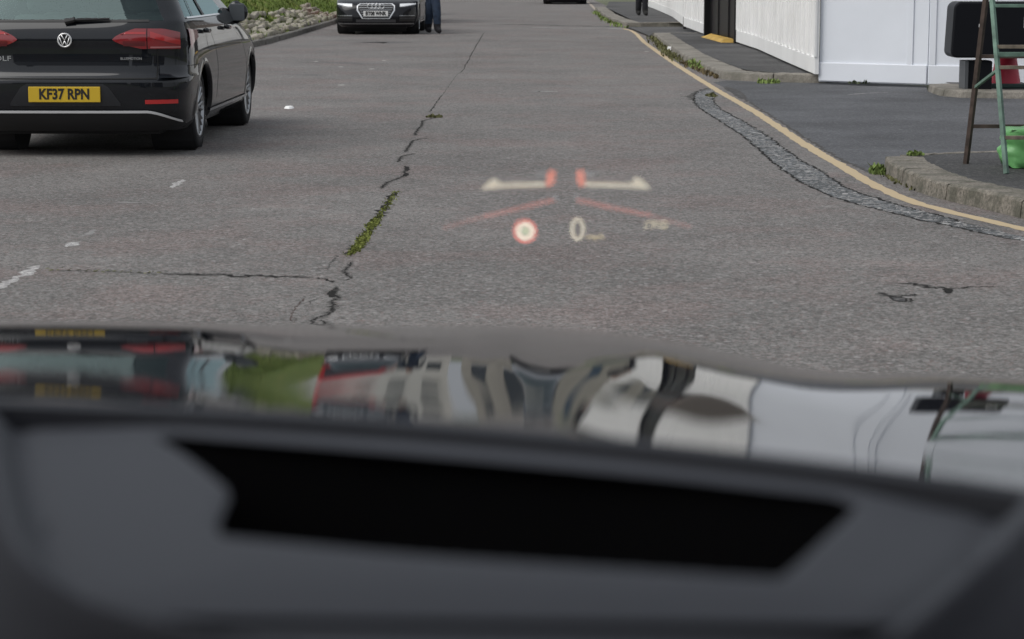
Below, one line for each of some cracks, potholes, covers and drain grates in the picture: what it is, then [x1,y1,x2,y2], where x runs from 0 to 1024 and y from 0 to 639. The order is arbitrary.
crack [58,36,482,325]
